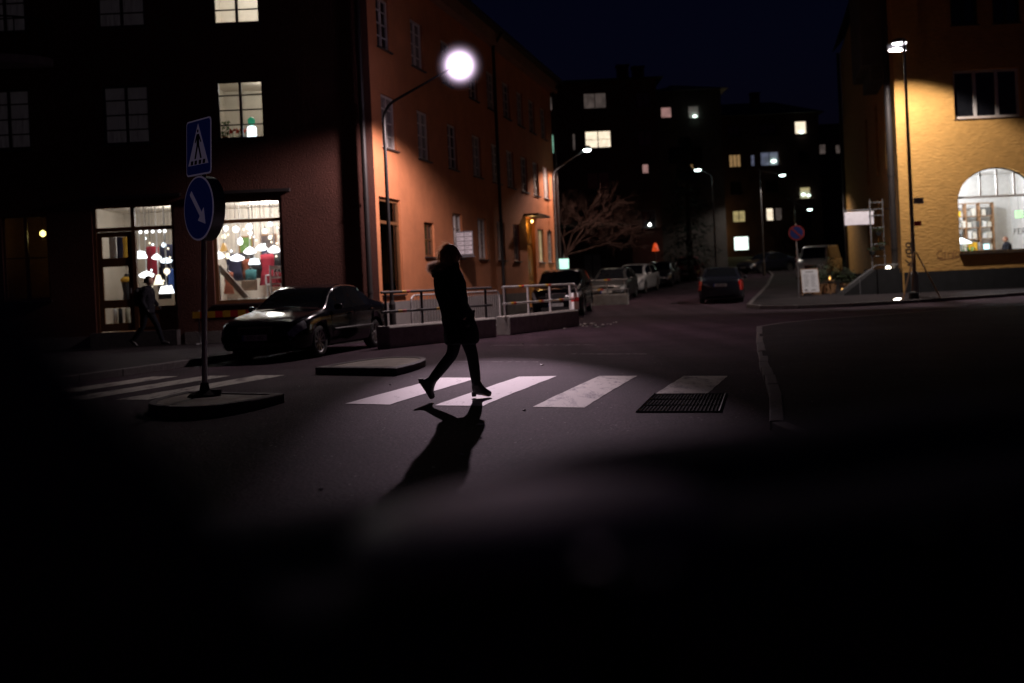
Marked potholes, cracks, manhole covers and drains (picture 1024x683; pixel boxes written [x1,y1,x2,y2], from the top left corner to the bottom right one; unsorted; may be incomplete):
drain grate [636,393,727,413]
